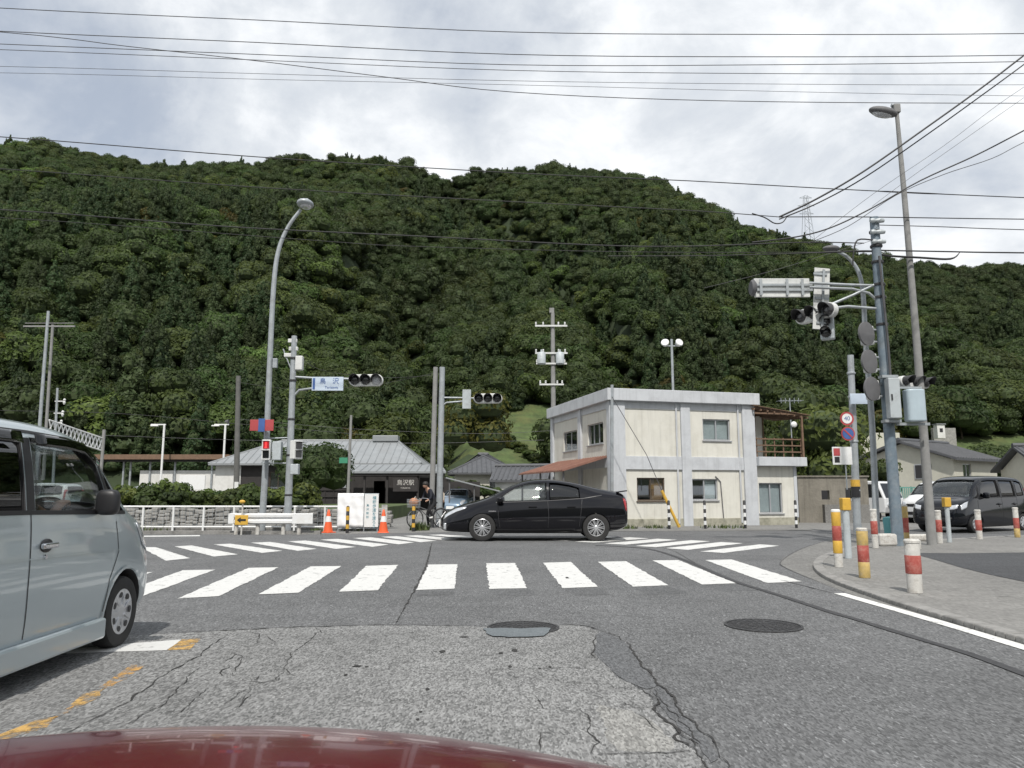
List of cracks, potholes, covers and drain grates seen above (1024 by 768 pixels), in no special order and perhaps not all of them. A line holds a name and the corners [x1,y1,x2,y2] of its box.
crack [555,624,730,768]
manhole cover [724,619,804,633]
crack [66,624,479,733]
manhole cover [487,621,559,633]
